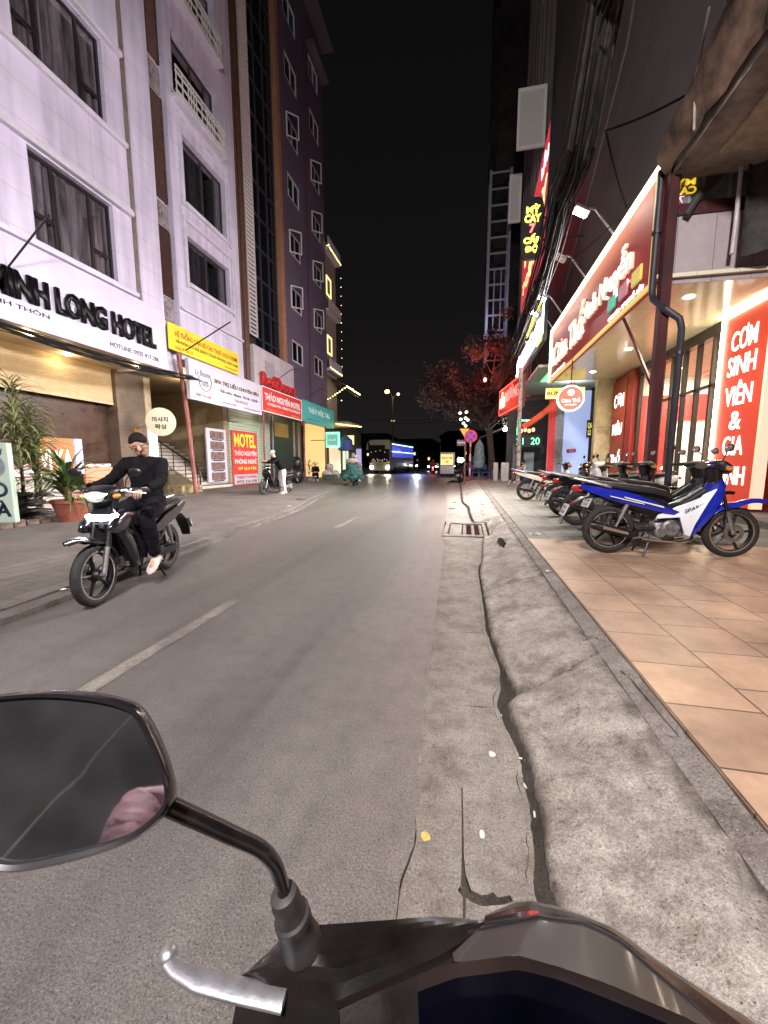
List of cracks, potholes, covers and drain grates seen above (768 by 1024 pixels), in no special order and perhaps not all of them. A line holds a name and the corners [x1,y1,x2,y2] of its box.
crack [460,486,492,534]
crack [396,820,416,919]
crack [458,552,582,918]
